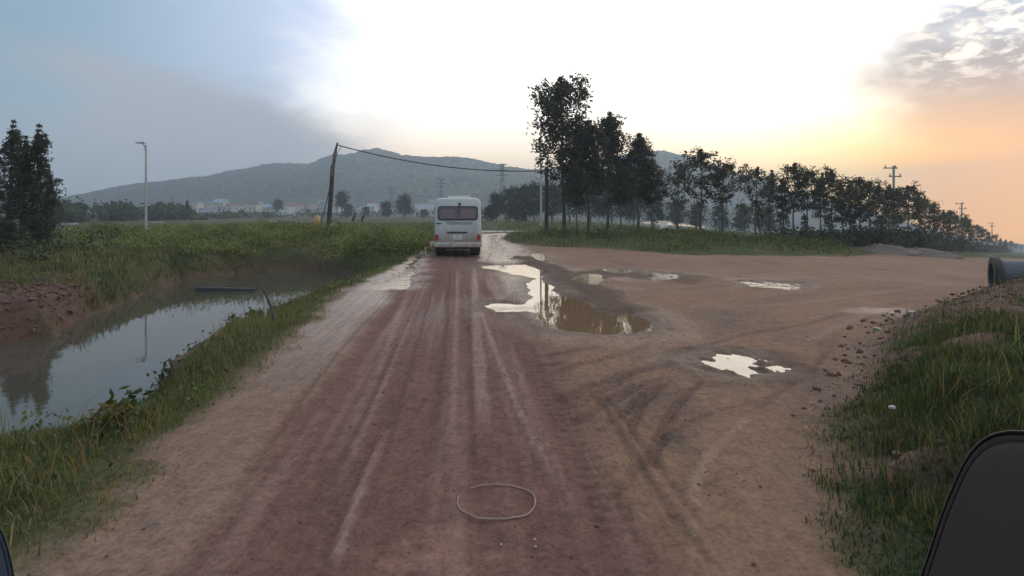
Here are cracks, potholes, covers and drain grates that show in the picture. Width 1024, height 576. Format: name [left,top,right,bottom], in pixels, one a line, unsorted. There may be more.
pothole [466,262,681,339]
pothole [659,344,826,388]
pothole [723,278,820,292]
pothole [631,270,694,281]
